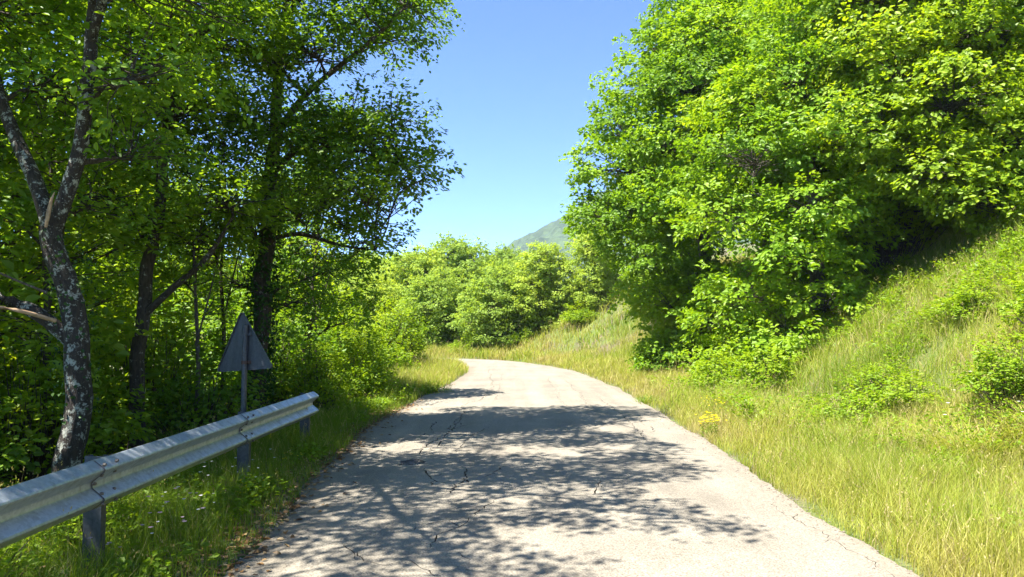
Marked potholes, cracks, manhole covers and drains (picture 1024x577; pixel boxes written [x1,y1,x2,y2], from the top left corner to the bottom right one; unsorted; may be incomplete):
crack [343,373,502,576]
crack [771,504,895,577]
